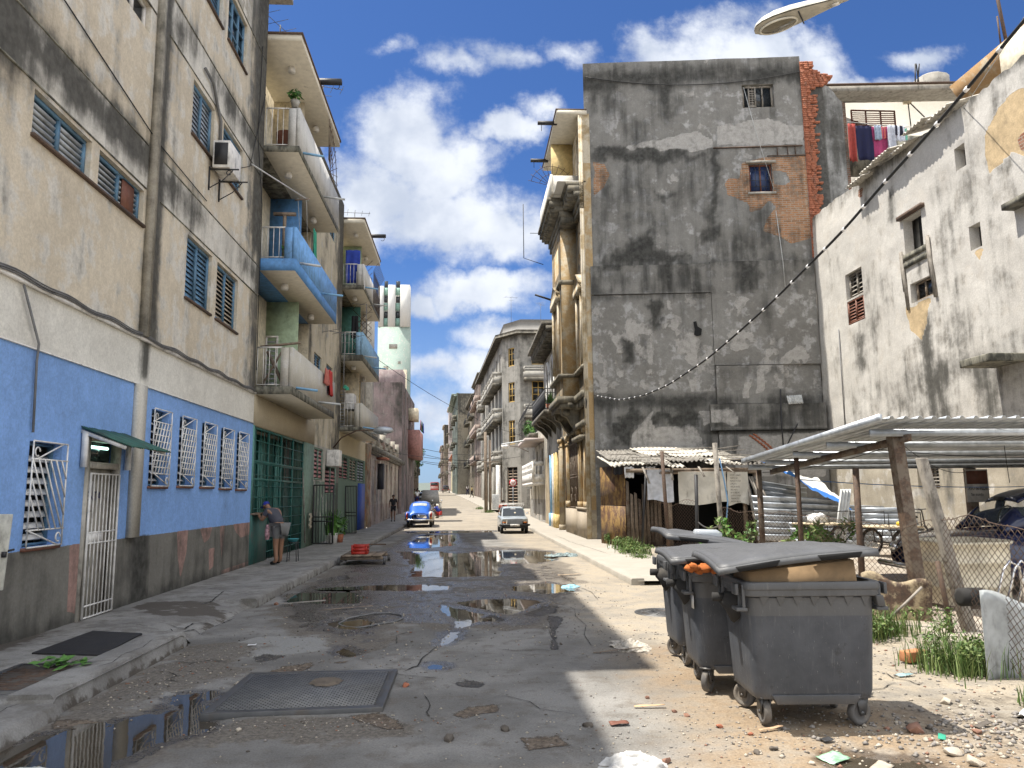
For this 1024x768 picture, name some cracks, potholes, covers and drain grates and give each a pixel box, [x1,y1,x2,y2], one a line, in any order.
manhole cover [200,669,398,722]
pothole [51,719,105,730]
